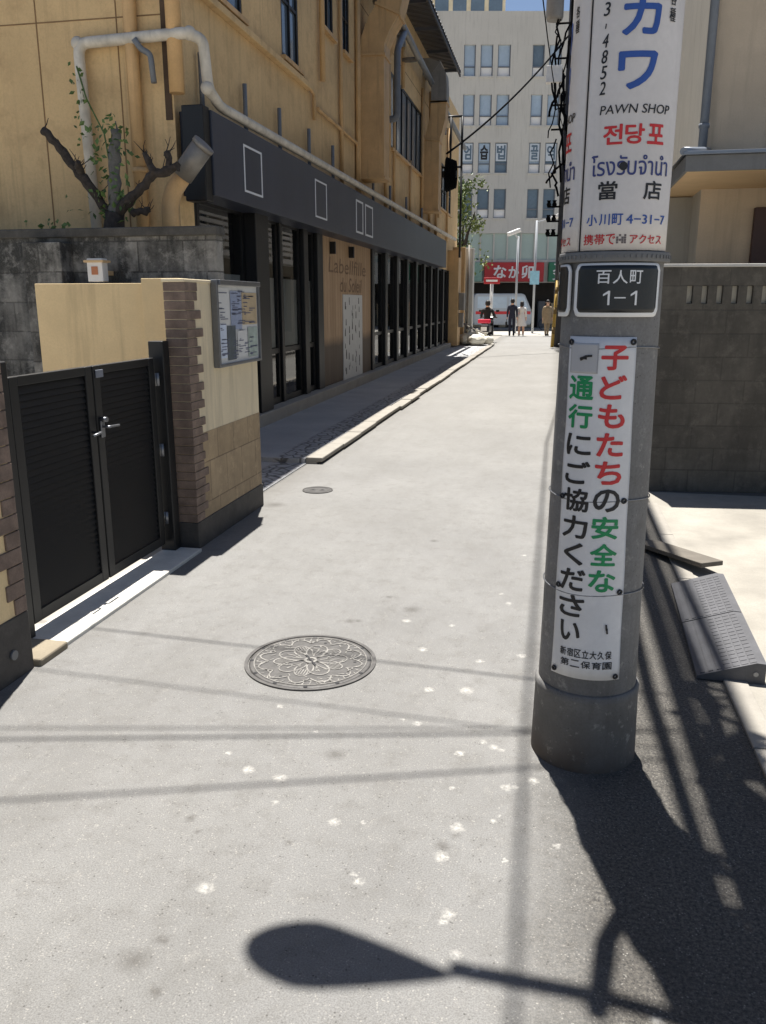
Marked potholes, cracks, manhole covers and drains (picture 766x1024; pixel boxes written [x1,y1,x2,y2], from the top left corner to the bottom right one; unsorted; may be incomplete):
manhole cover [244,635,376,691]
manhole cover [302,486,333,494]
